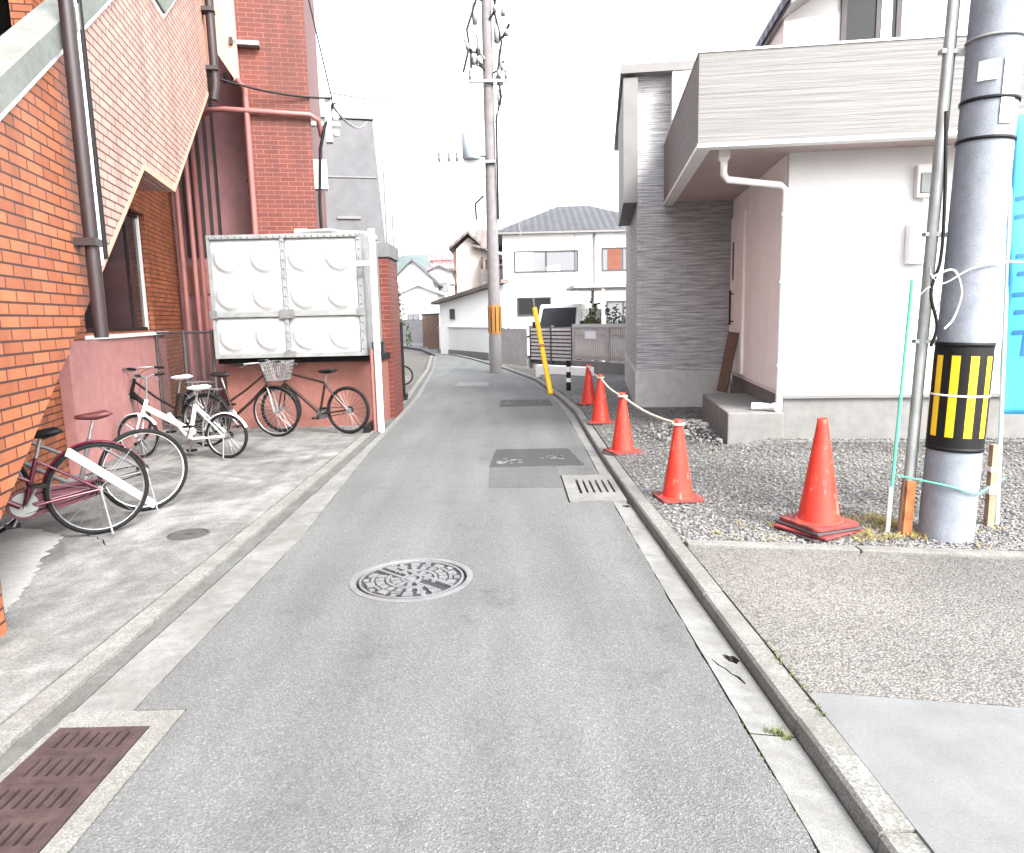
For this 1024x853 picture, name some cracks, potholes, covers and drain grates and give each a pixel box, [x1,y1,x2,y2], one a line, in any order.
drain grate [0,710,185,853]
drain grate [561,474,627,504]
manhole cover [166,528,210,540]
manhole cover [349,558,473,603]
